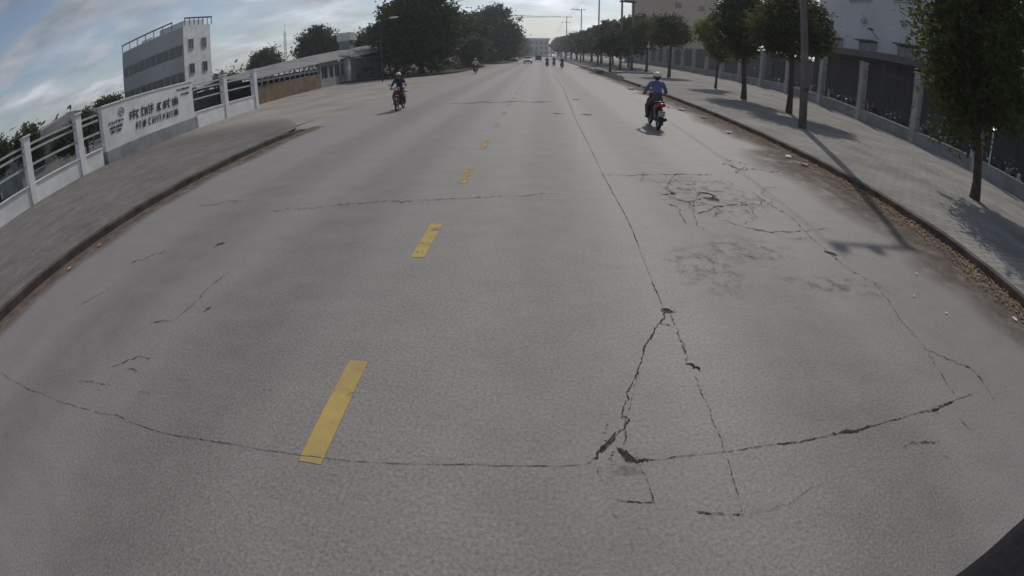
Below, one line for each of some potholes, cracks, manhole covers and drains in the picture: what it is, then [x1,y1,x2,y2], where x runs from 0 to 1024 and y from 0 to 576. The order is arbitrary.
crack [5,375,584,466]
crack [589,311,994,517]
crack [643,160,857,274]
